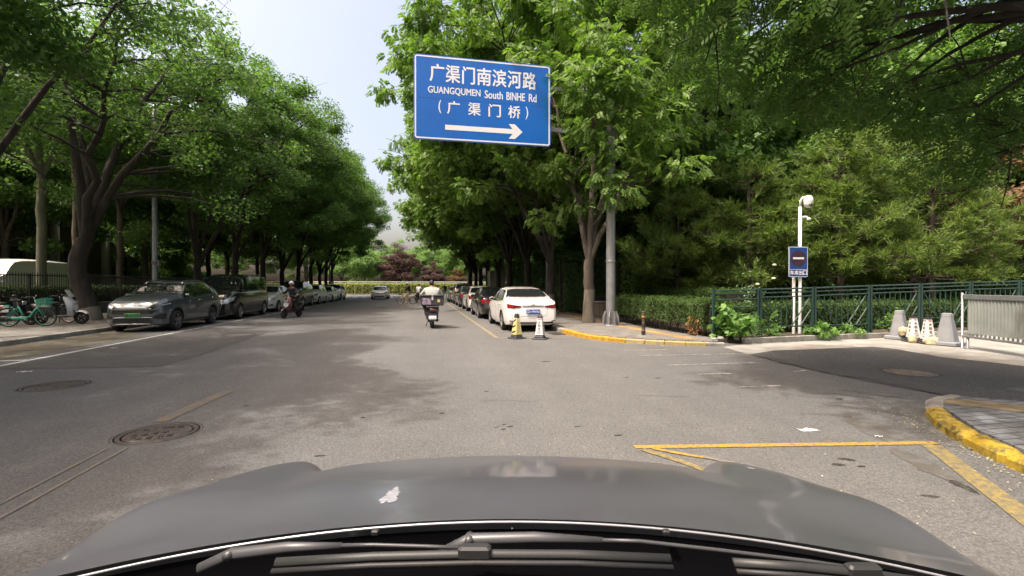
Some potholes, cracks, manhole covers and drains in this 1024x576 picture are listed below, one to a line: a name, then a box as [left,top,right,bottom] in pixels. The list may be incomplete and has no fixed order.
manhole cover [13,380,94,392]
manhole cover [880,368,943,377]
manhole cover [108,422,204,446]
